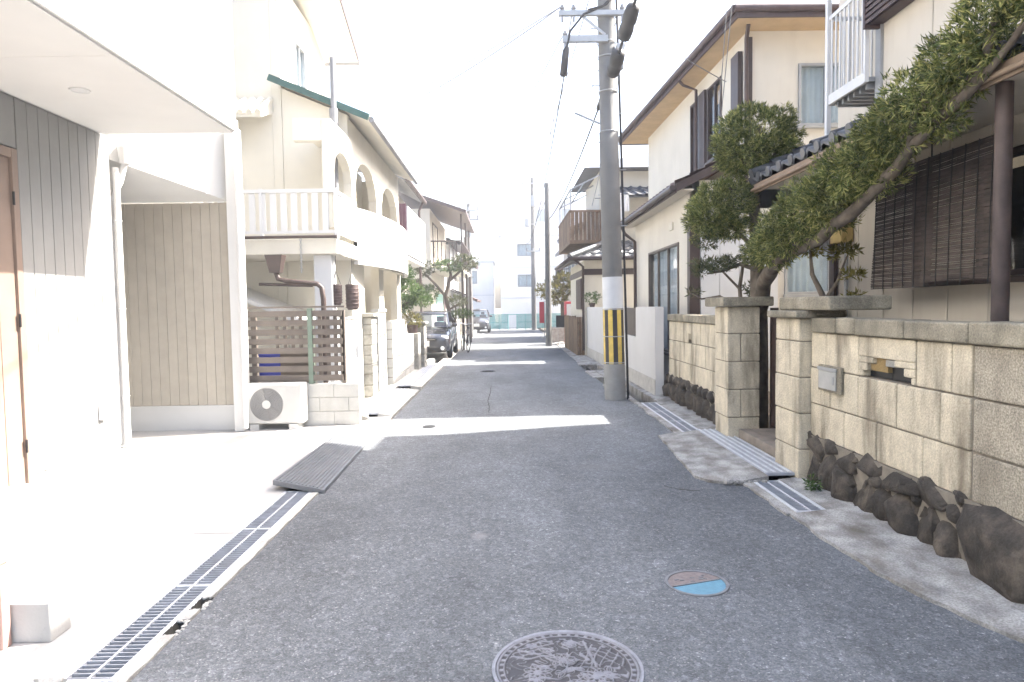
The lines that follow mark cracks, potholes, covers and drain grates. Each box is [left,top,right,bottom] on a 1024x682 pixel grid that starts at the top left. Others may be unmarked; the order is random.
drain grate [641,402,698,432]
manhole cover [665,570,730,597]
manhole cover [492,630,645,682]
drain grate [62,491,312,682]
pothole [163,619,191,637]
pothole [189,596,214,612]
drain grate [754,480,826,513]
